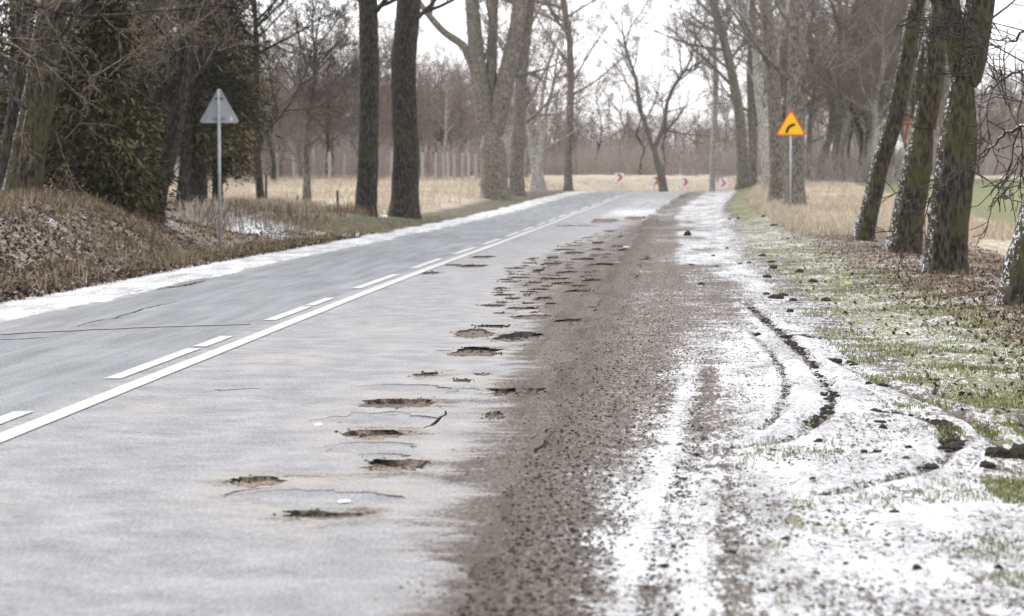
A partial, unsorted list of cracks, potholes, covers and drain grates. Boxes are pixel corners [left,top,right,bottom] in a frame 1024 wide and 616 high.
pothole [334,427,413,440]
pothole [486,386,558,396]
pothole [222,474,288,490]
pothole [450,326,495,338]
pothole [358,396,448,409]
pothole [446,347,505,356]
crack [424,411,447,428]
crack [0,281,251,340]
pothole [490,331,548,342]
pothole [361,457,431,473]
pothole [272,507,376,519]
pothole [480,410,504,420]
